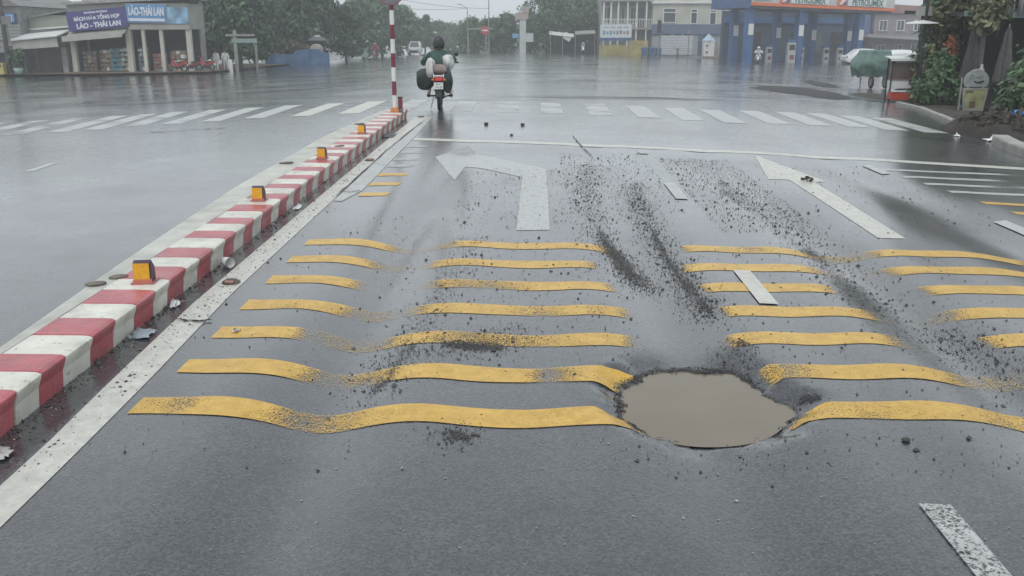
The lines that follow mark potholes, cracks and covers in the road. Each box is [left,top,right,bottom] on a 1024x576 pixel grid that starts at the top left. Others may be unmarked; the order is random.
pothole [614,367,799,449]
